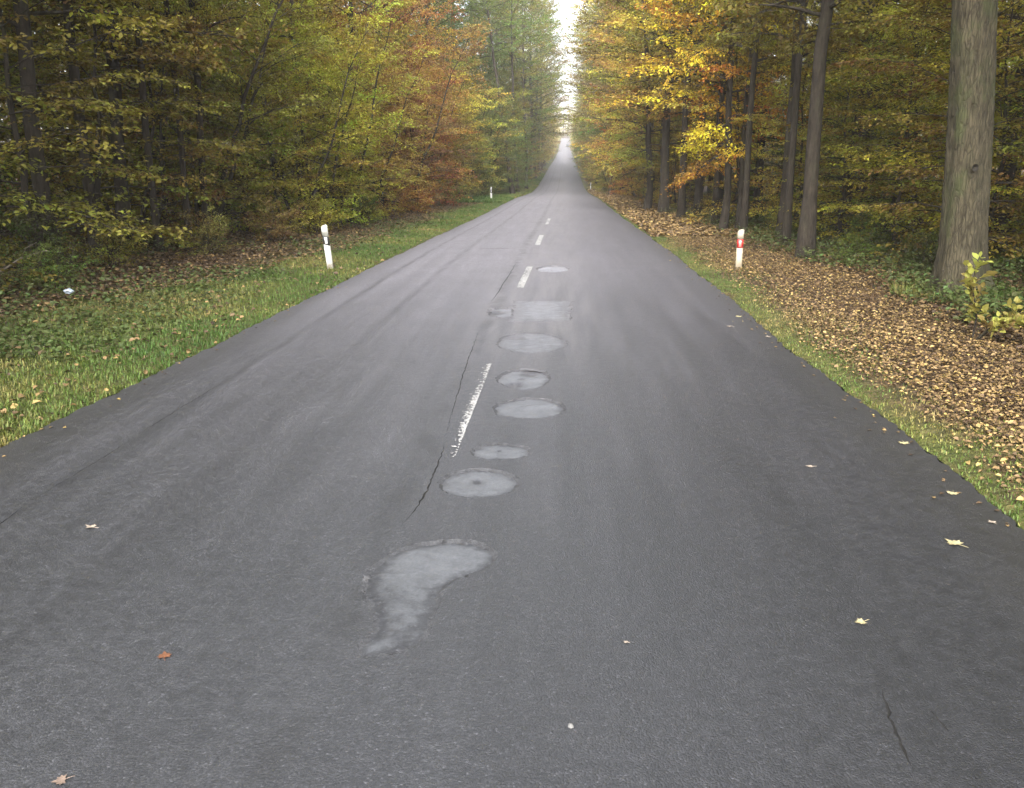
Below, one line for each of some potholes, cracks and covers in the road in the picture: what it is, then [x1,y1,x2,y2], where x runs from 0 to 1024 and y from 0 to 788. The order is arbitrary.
crack [407,267,514,519]
crack [882,689,913,768]
